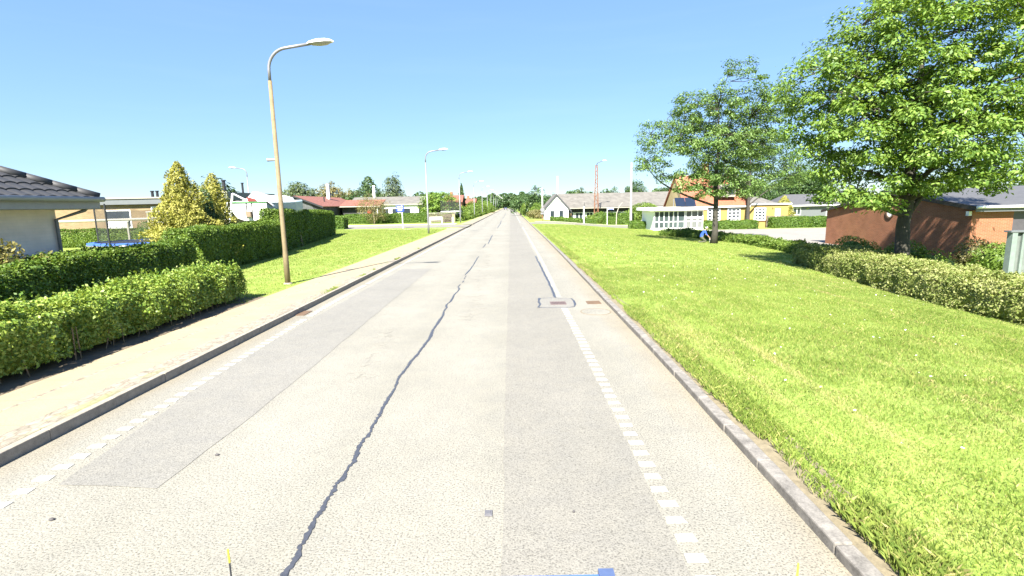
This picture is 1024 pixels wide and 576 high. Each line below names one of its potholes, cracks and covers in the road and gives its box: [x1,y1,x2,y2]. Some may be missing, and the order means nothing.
crack [346,329,395,382]
crack [456,214,506,321]
